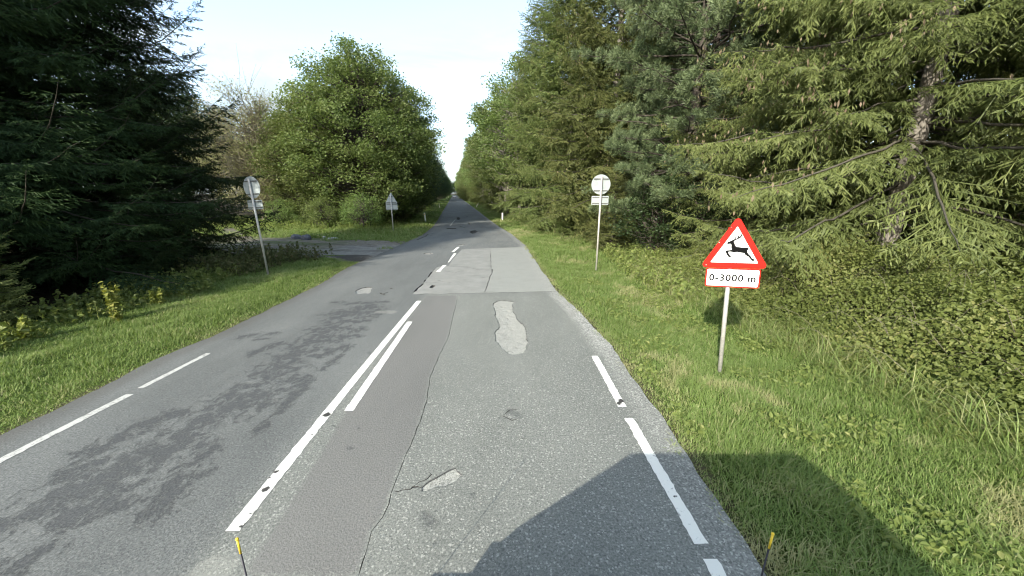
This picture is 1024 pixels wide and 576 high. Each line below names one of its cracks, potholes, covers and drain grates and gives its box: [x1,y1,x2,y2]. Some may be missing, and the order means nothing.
crack [358,302,457,576]
